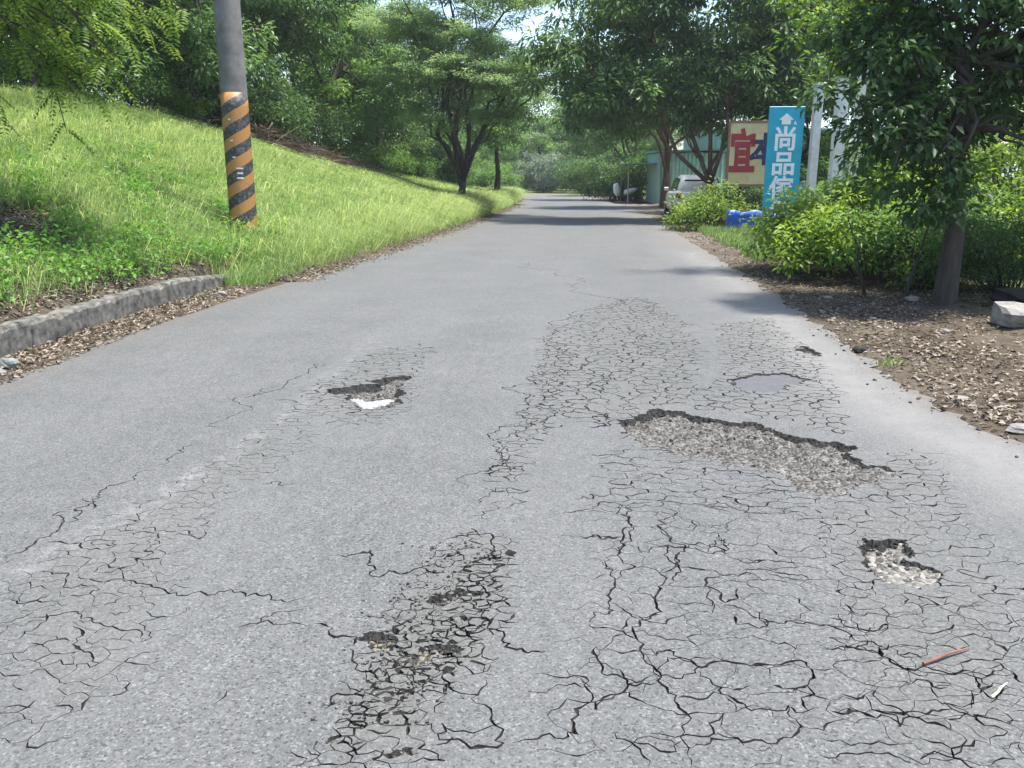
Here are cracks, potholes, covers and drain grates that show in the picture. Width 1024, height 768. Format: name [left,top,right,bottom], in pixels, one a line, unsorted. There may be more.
pothole [326,375,412,411]
crack [290,445,1024,768]
crack [457,258,733,519]
crack [705,318,852,434]
pothole [856,538,945,590]
pothole [728,372,813,393]
pothole [794,346,822,356]
pothole [617,408,896,497]
